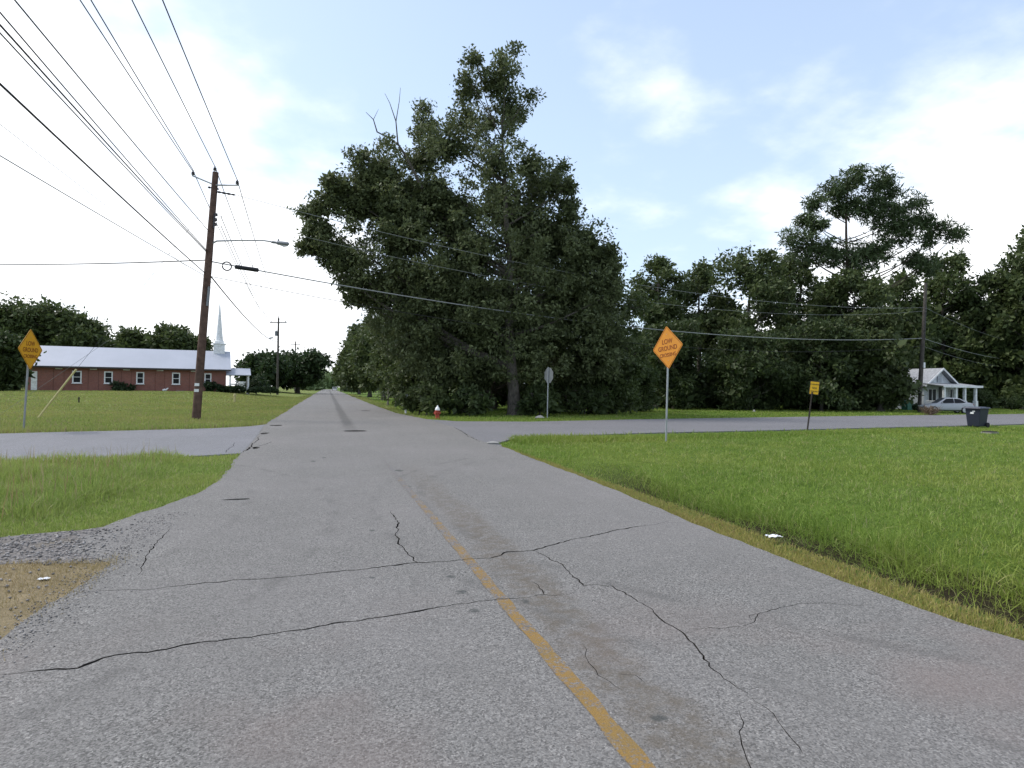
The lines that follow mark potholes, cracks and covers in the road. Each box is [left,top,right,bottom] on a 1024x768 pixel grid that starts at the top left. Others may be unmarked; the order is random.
crack [75,512,868,768]
